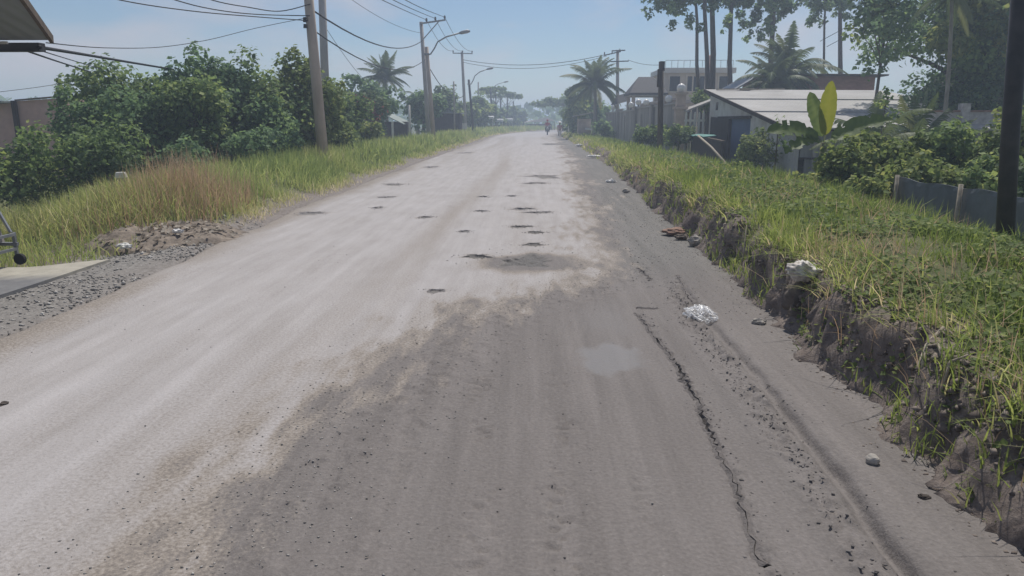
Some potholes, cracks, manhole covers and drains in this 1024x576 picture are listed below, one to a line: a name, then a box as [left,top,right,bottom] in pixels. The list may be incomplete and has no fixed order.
pothole [498,253,551,267]
crack [636,268,652,281]
crack [633,275,769,567]
